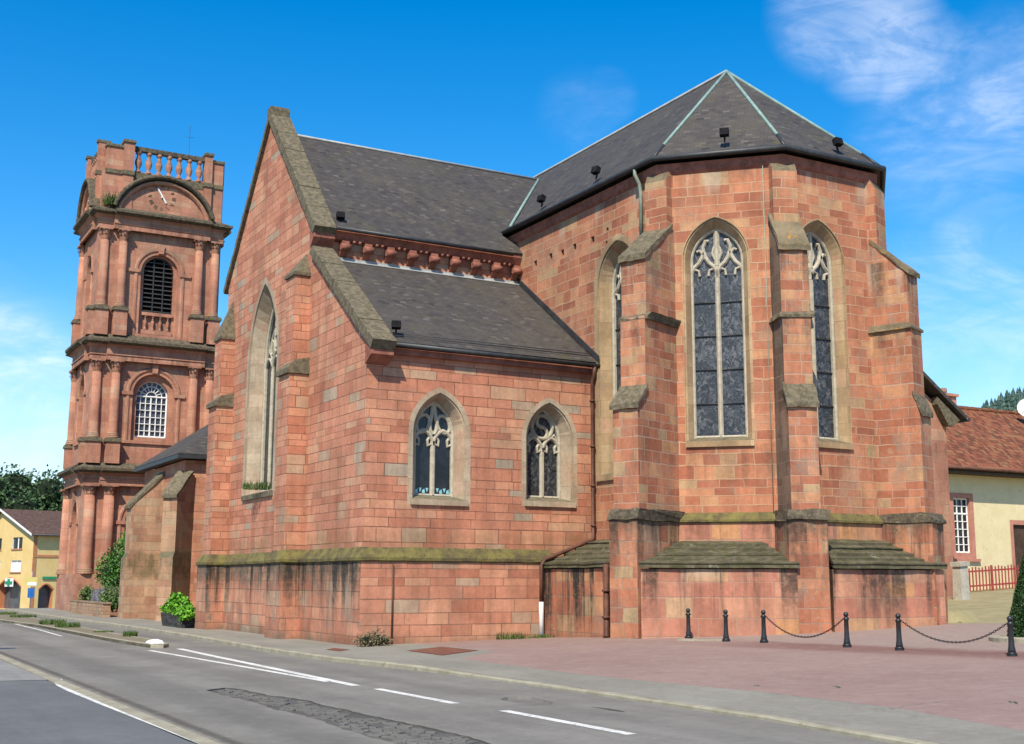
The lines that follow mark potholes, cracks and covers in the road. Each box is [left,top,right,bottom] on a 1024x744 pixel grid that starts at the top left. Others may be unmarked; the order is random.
manhole cover [407,647,479,656]
